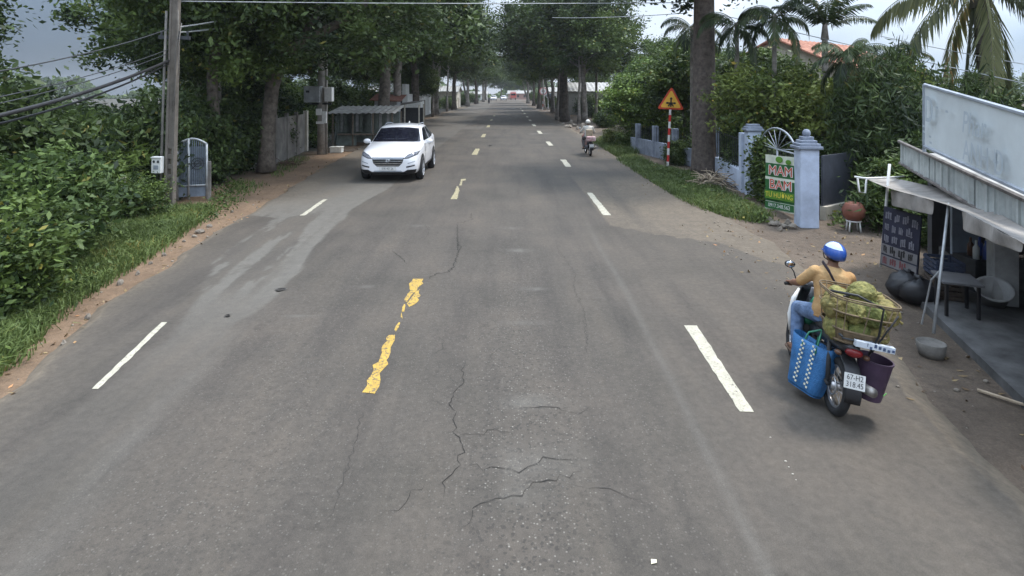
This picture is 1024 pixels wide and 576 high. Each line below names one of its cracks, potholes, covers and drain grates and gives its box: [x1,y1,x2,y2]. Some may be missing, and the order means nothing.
crack [433,361,634,527]
